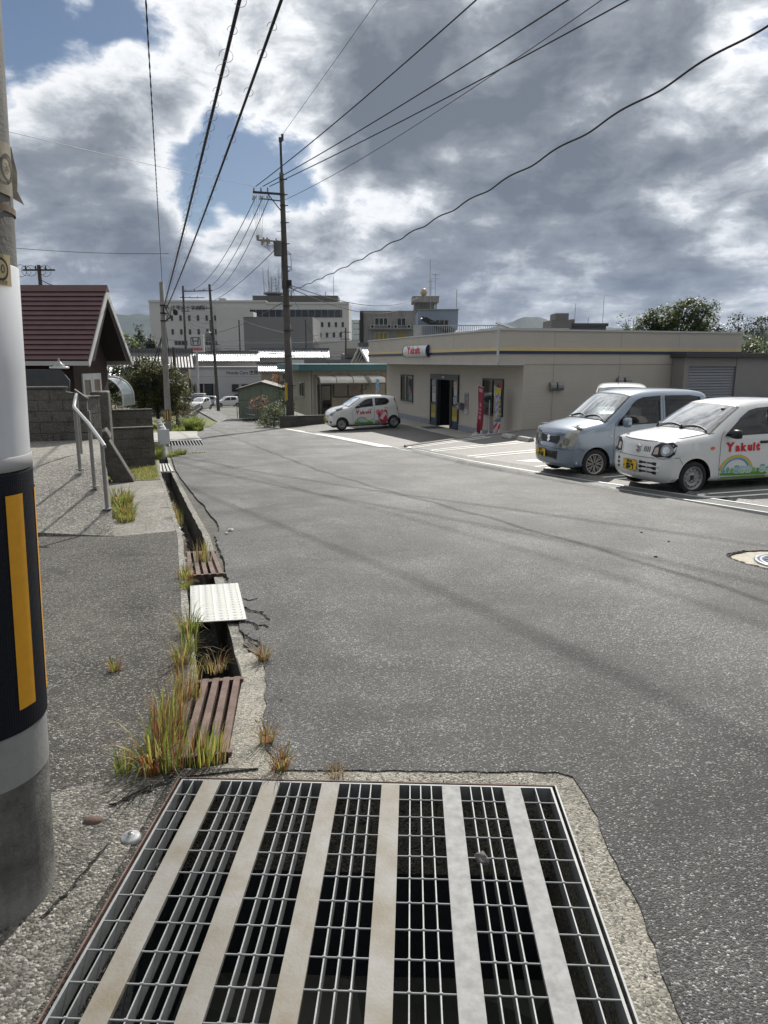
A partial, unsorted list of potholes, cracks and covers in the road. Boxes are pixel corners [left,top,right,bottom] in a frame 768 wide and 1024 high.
crack [243,598,270,647]
drain grate [36,777,640,1024]
crack [109,776,174,805]
drain grate [169,676,244,766]
crack [40,845,107,918]
drain grate [186,550,226,579]
